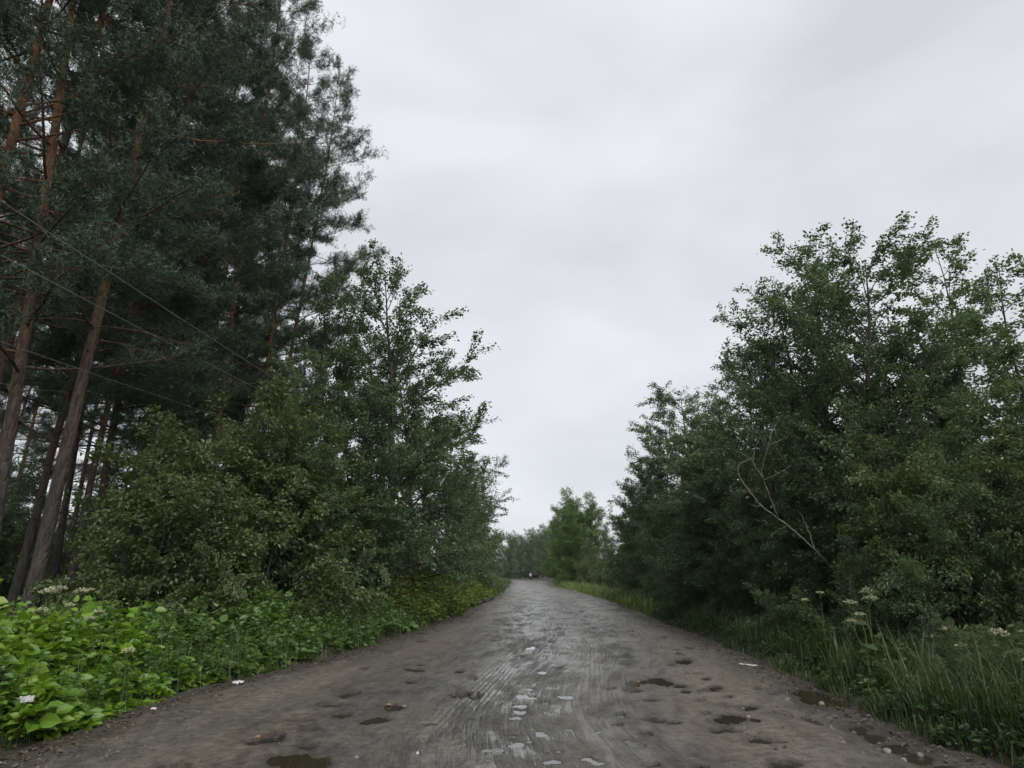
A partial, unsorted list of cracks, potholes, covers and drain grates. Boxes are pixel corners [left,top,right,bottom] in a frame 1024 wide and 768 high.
pothole [713,714,761,725]
pothole [625,677,689,688]
pothole [359,716,393,725]
pothole [383,703,406,712]
pothole [244,732,286,745]
